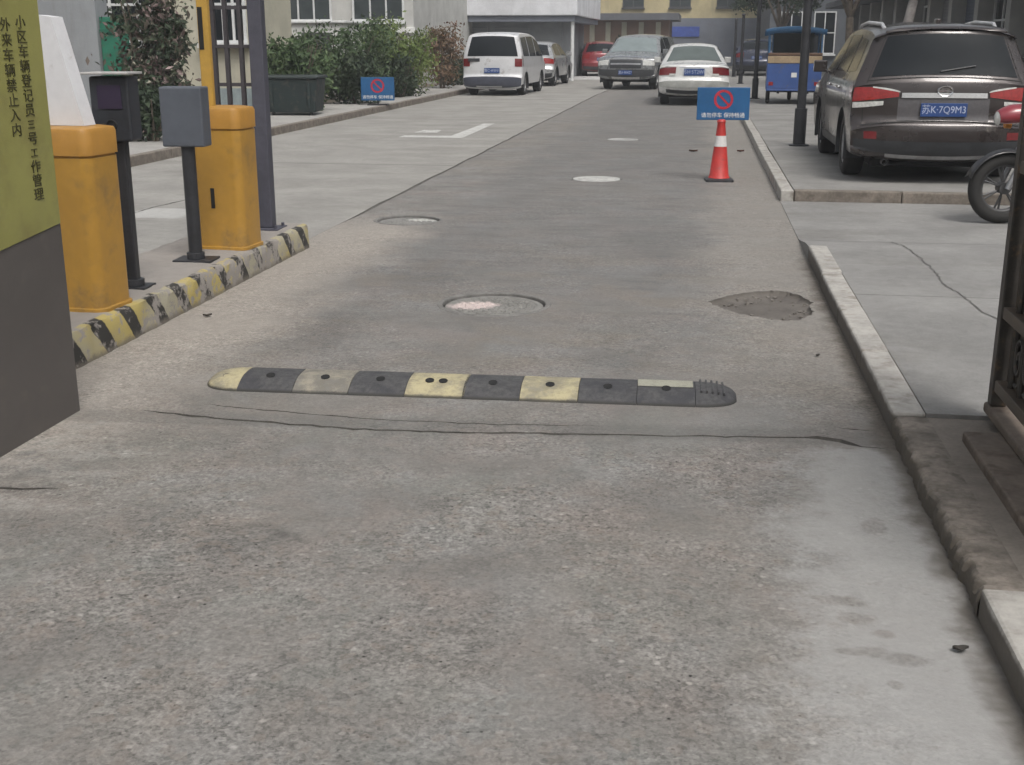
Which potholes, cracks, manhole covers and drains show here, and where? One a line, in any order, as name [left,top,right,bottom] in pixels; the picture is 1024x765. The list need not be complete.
manhole cover [437,292,551,317]
crack [893,242,997,319]
manhole cover [373,215,443,225]
crack [144,404,883,449]
pothole [708,290,814,321]
